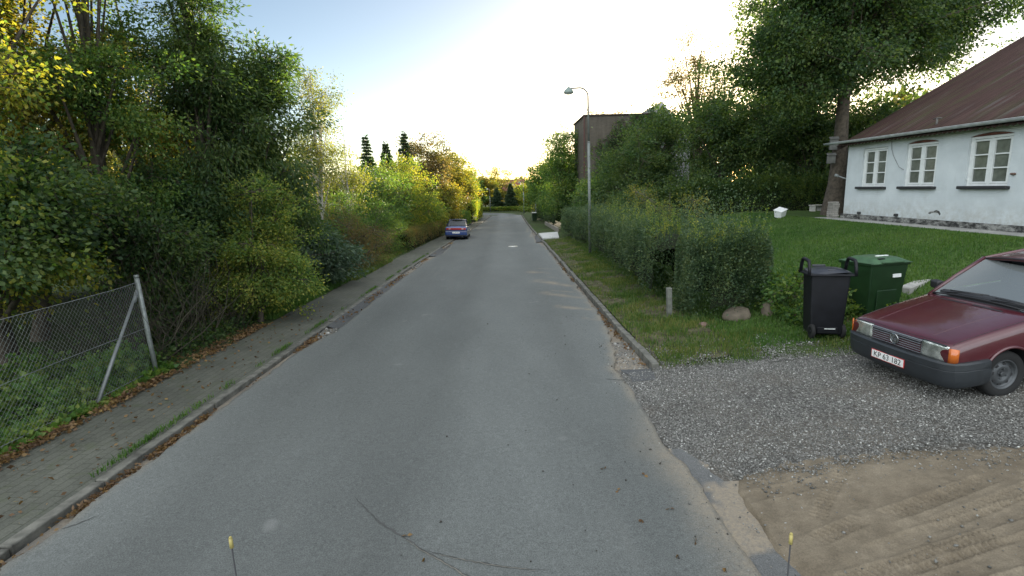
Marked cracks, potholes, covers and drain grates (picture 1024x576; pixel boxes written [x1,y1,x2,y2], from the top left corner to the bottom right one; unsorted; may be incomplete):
crack [355,497,545,576]
